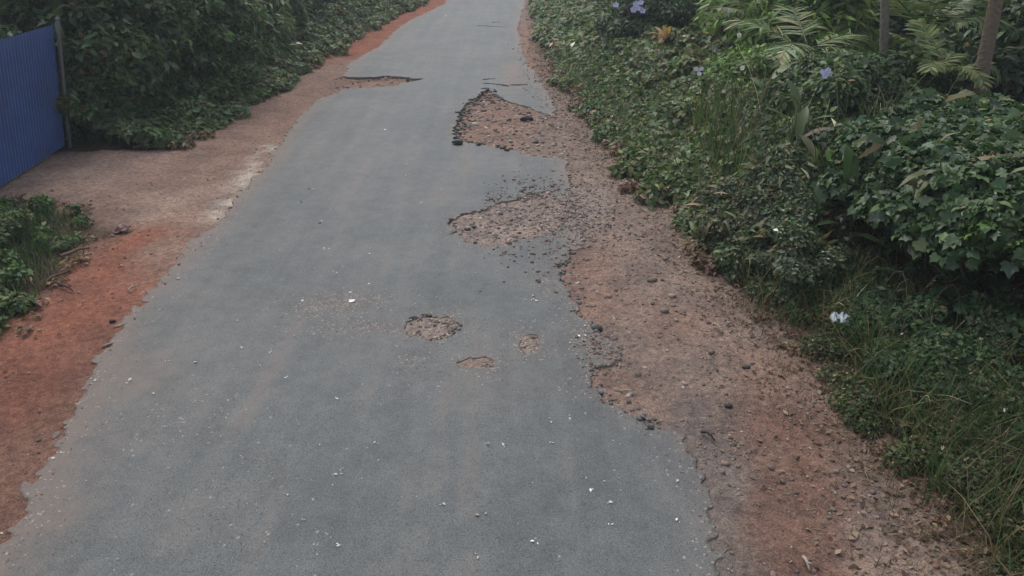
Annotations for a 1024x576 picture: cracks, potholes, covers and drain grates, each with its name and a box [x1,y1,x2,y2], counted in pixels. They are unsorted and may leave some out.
pothole [404,314,463,341]
pothole [453,89,587,160]
pothole [449,191,568,247]
pothole [520,335,540,353]
pothole [457,358,494,369]
